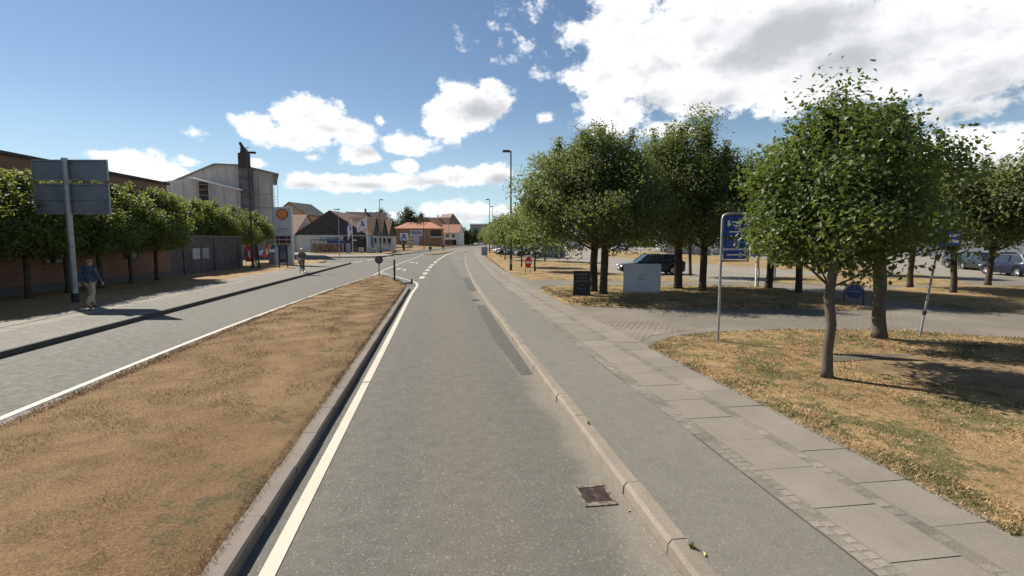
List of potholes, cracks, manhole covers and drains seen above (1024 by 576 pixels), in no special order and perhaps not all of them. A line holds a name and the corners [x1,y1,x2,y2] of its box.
drain grate [574,483,618,507]
